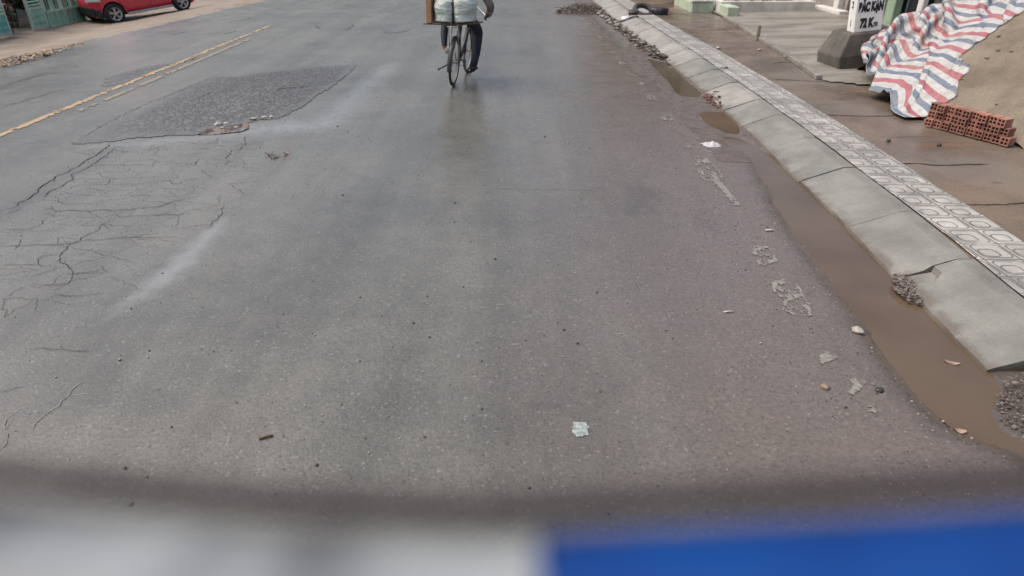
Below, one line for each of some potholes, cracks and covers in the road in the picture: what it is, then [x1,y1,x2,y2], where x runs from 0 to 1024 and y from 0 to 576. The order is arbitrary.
crack [0,134,272,316]
crack [1,382,85,448]
pothole [199,122,249,135]
